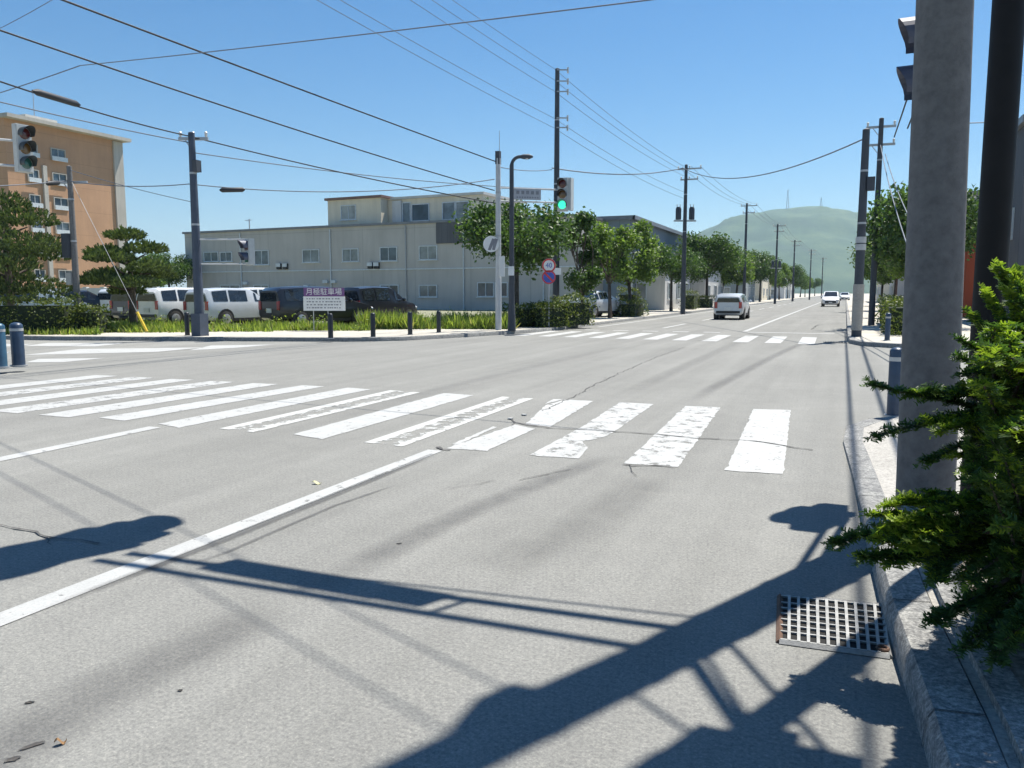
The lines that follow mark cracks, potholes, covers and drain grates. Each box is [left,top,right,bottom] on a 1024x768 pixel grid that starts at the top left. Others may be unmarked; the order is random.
crack [511,334,813,450]
crack [0,524,99,544]
drain grate [776,593,893,659]
